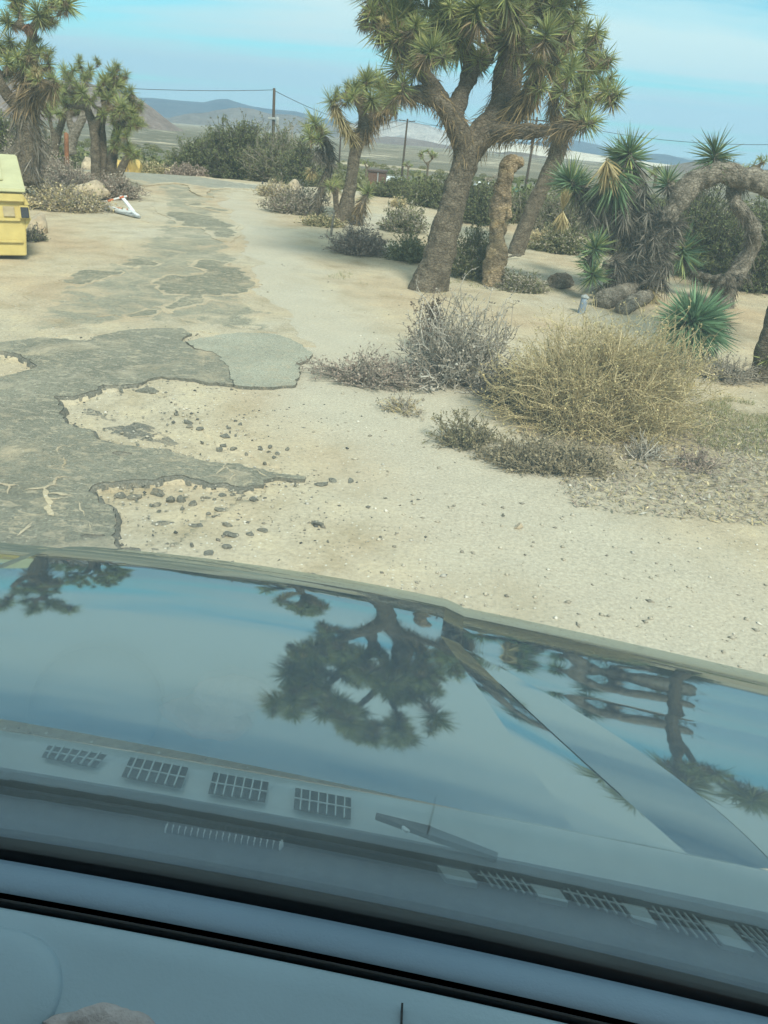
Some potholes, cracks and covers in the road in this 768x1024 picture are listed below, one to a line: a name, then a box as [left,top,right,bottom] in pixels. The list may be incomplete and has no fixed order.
pothole [55,385,282,474]
crack [0,445,91,536]
pothole [89,476,265,553]
pothole [0,352,36,377]
